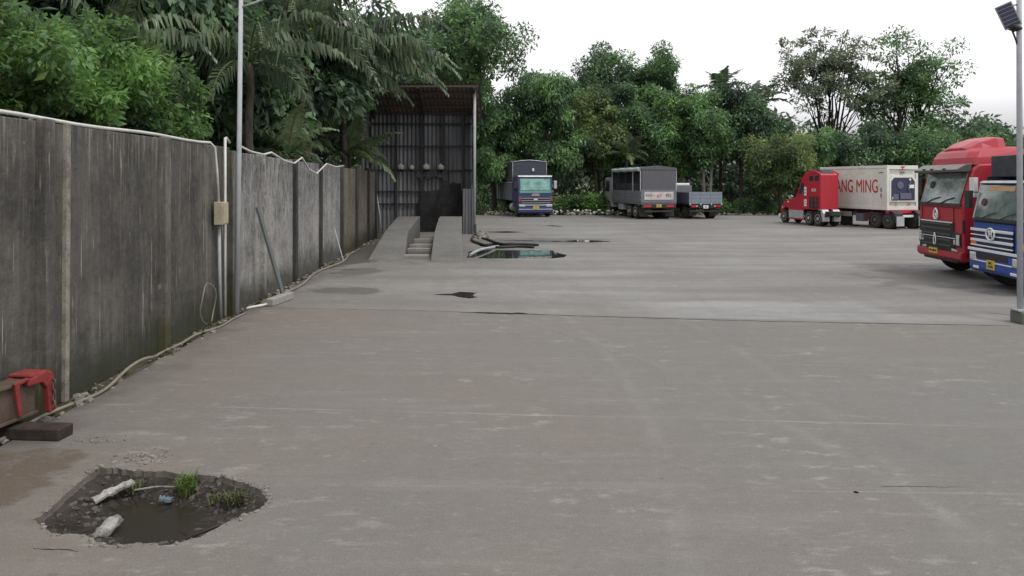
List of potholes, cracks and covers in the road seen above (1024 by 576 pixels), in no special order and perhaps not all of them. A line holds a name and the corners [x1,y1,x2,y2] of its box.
pothole [33,467,268,546]
